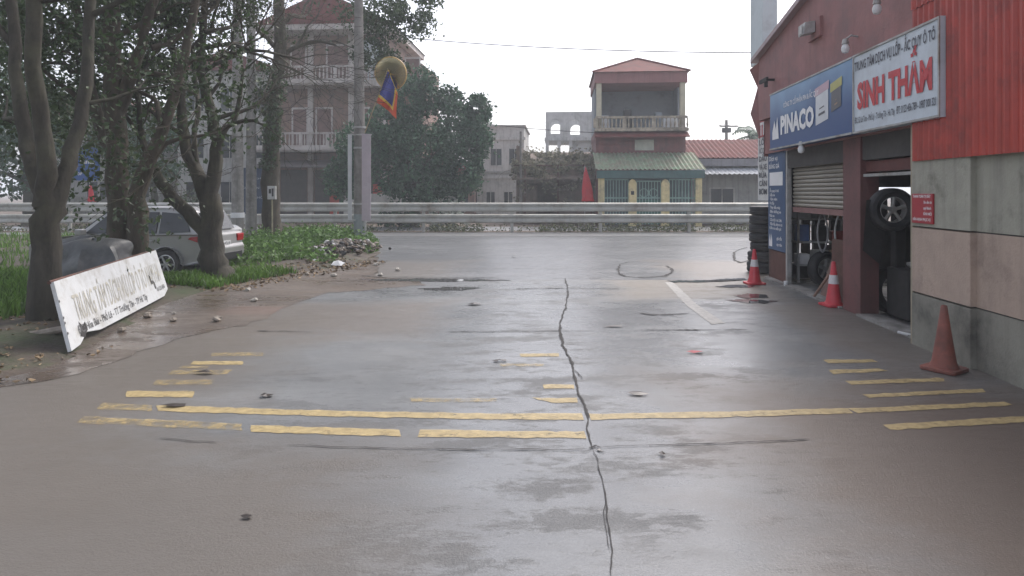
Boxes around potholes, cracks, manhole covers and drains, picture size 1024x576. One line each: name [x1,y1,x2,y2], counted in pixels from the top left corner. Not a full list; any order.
crack [167,278,804,573]
